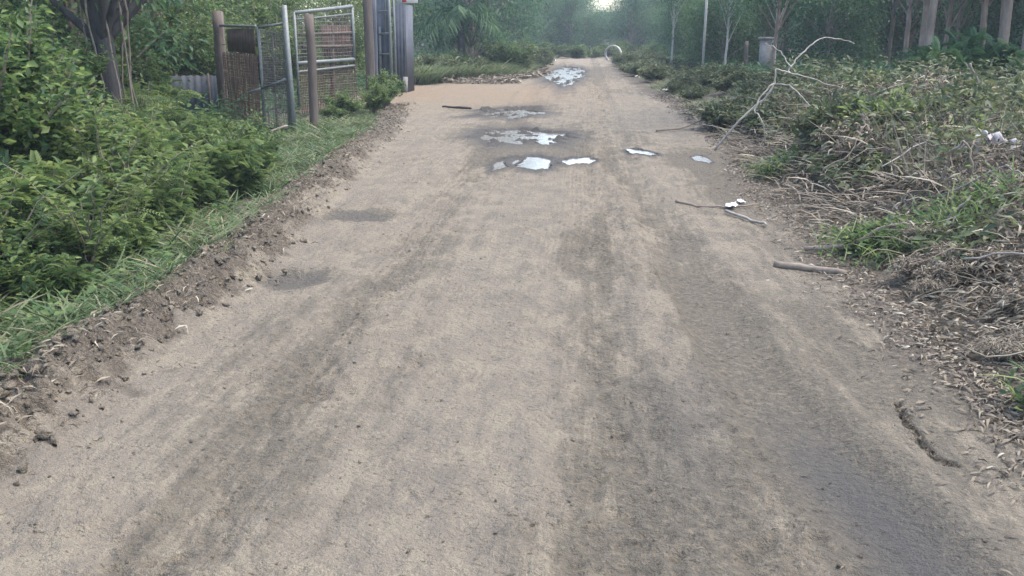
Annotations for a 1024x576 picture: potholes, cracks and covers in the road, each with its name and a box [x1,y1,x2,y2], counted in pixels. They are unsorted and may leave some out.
pothole [503,153,566,172]
pothole [465,105,550,120]
pothole [487,155,525,172]
pothole [541,66,590,89]
crack [894,404,957,468]
pothole [464,126,582,147]
pothole [549,155,599,165]
pothole [691,155,716,164]
pothole [624,147,662,157]
